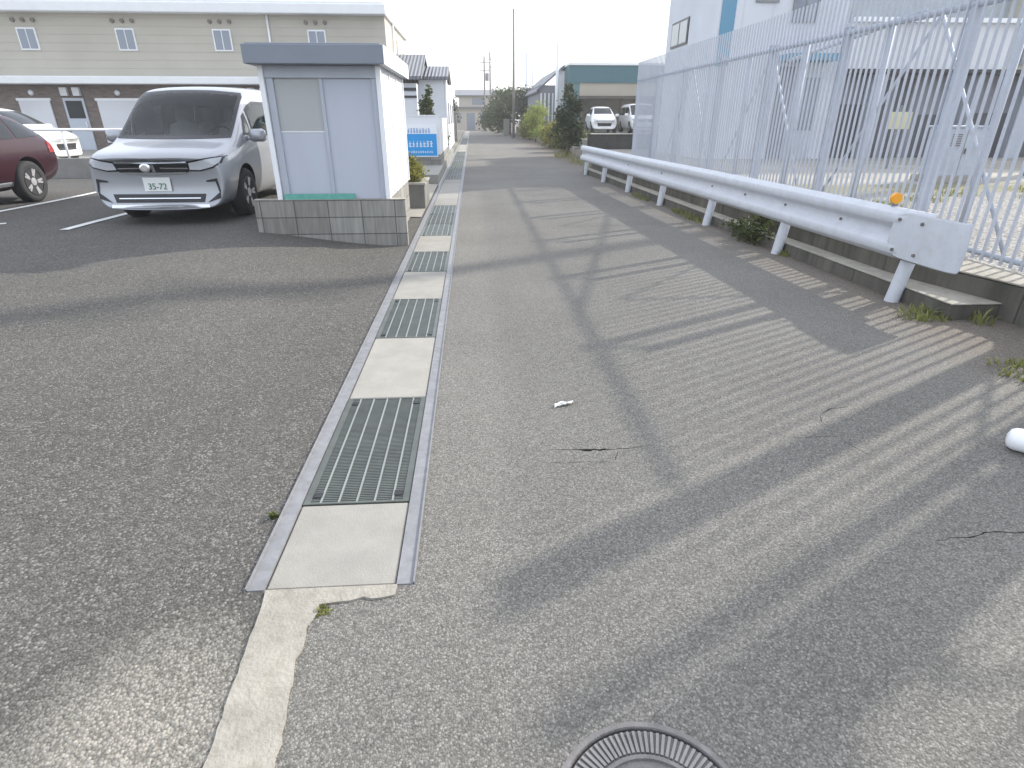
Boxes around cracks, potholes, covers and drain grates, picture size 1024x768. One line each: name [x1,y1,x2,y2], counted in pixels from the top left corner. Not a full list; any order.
drain grate [420,223,454,236]
manhole cover [562,722,729,768]
drain grate [303,397,426,507]
drain grate [430,205,457,214]
drain grate [425,214,456,224]
crack [796,406,870,456]
drain grate [376,298,442,339]
crack [936,531,1024,541]
crack [546,446,645,463]
drain grate [405,251,450,272]
